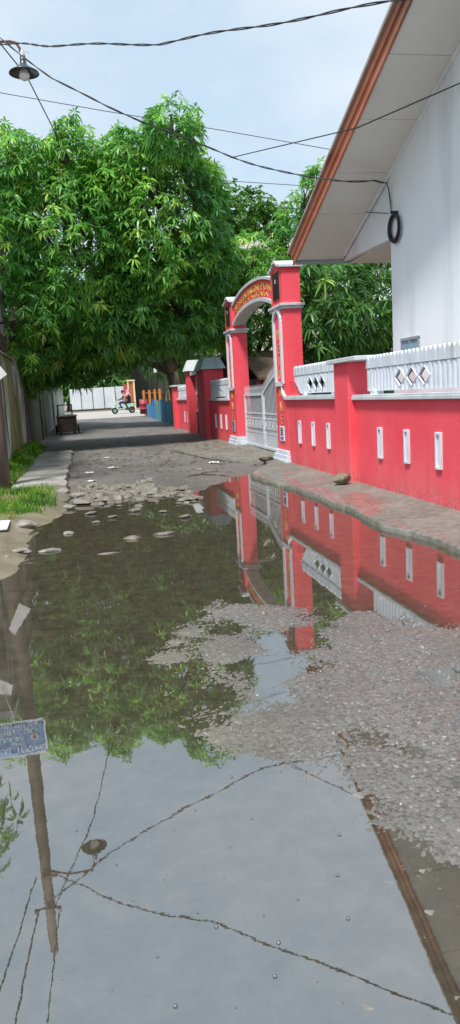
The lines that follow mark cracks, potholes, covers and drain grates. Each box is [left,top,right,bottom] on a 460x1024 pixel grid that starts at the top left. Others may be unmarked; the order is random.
pothole [73,481,202,575]
